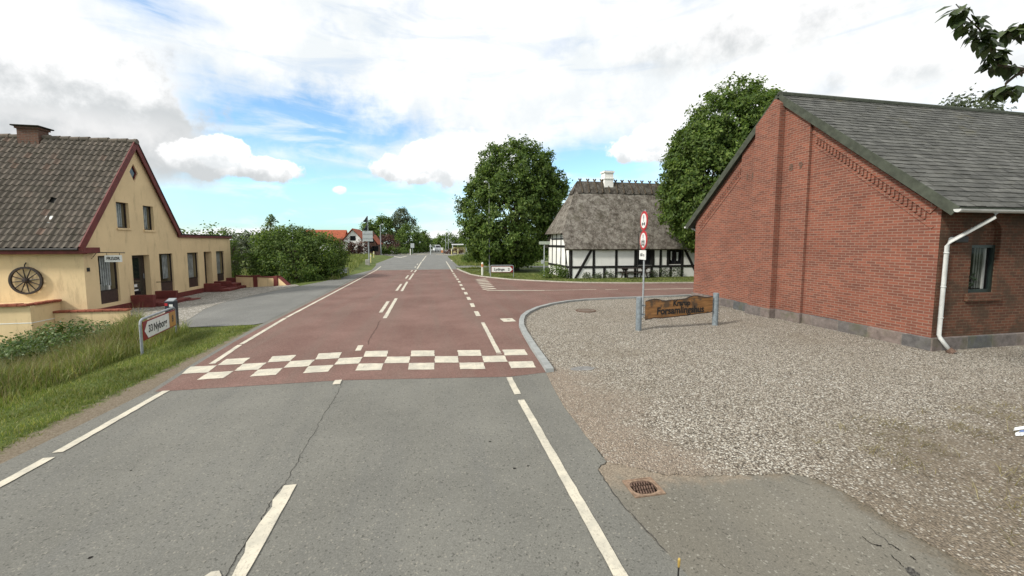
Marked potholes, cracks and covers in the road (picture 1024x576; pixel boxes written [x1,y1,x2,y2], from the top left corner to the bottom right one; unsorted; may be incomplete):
crack [226,384,341,576]
drain grate [622,477,666,498]
